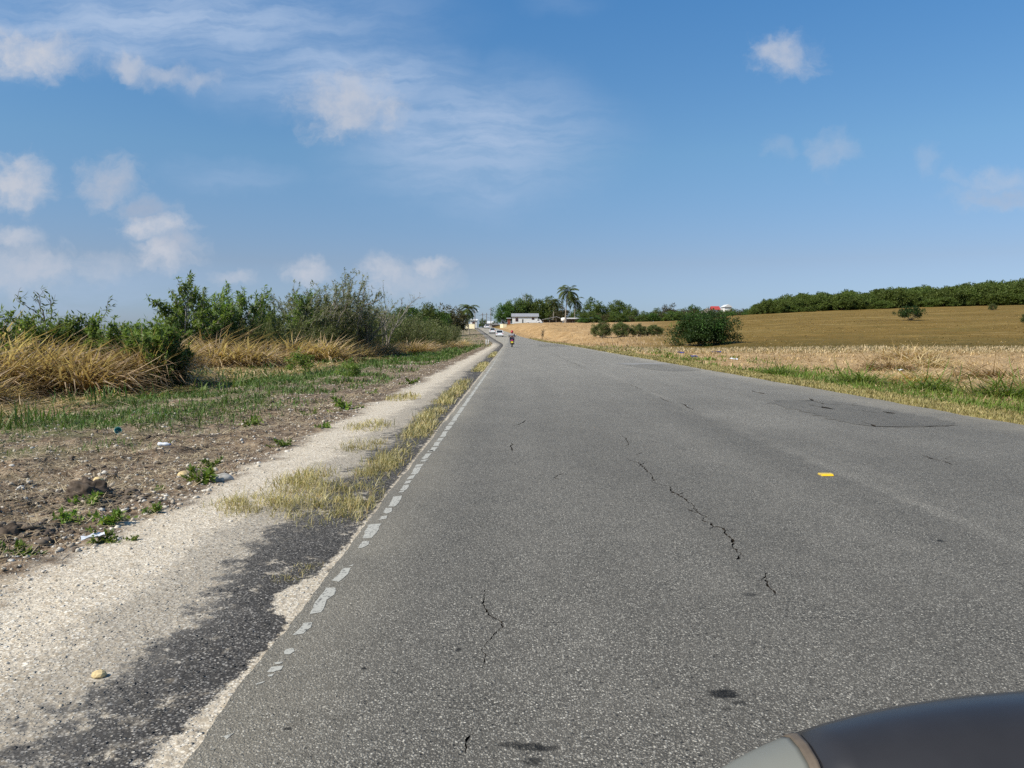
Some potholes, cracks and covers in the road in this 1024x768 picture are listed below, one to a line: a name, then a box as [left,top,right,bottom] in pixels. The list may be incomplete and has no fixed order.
crack [625,438,742,560]
crack [467,589,504,665]
